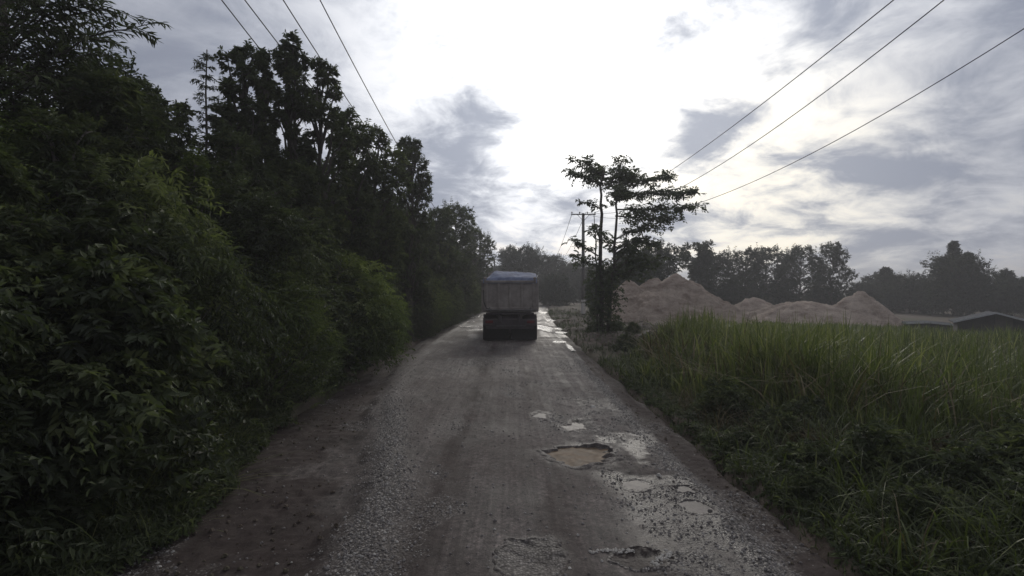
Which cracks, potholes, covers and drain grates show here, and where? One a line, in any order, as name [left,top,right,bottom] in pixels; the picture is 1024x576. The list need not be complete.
pothole [492,535,572,576]
pothole [530,410,551,419]
pothole [536,442,625,470]
pothole [667,483,699,494]
pothole [606,545,680,572]
pothole [621,477,656,493]
pothole [676,497,721,515]
pothole [559,416,598,433]
